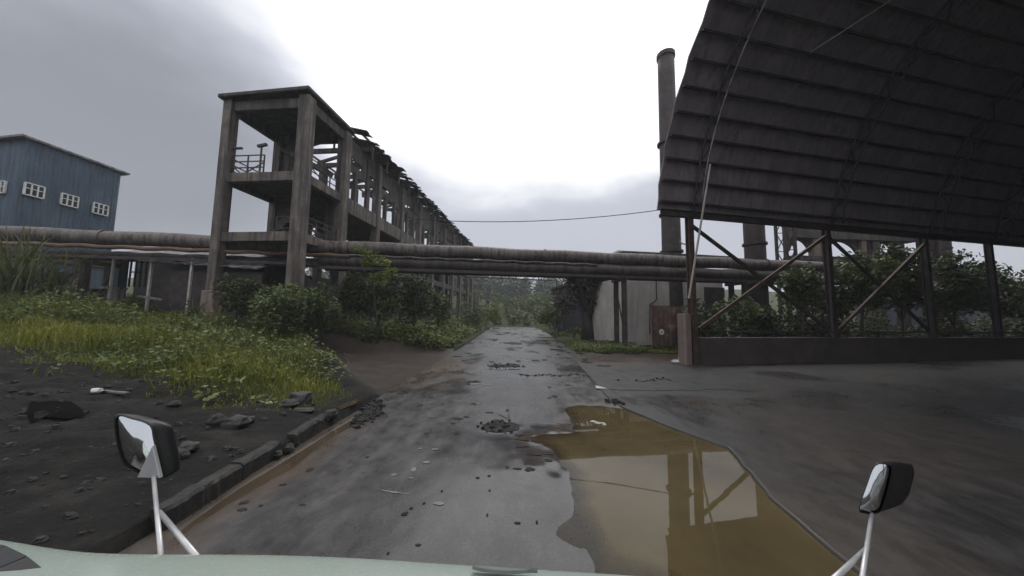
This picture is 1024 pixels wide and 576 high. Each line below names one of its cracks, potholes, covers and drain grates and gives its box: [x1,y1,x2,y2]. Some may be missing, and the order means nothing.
pothole [476,419,519,433]
